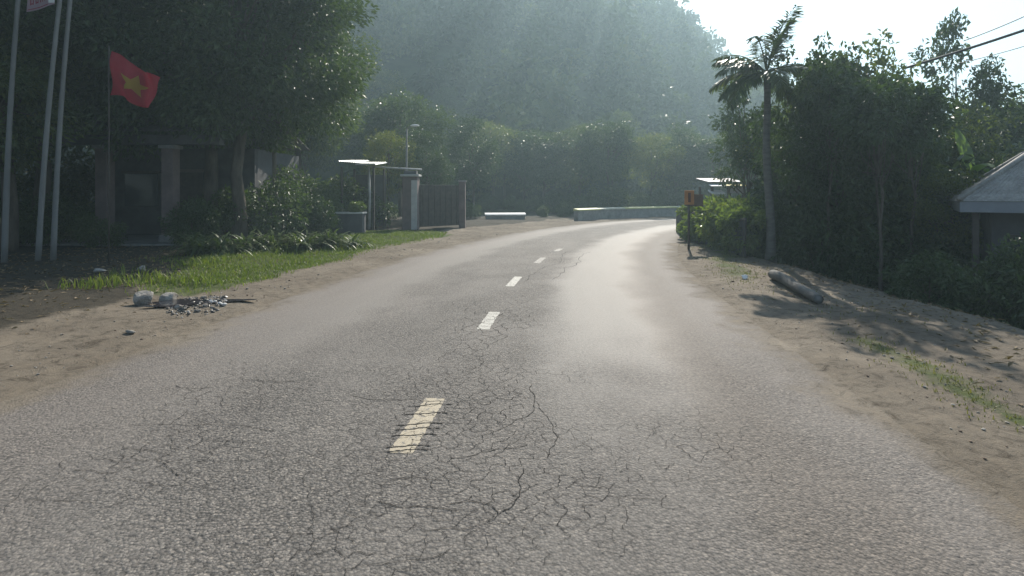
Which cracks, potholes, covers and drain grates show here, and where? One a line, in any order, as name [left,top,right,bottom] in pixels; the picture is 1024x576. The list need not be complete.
crack [1,356,319,524]
crack [225,357,689,576]
crack [635,404,804,496]
